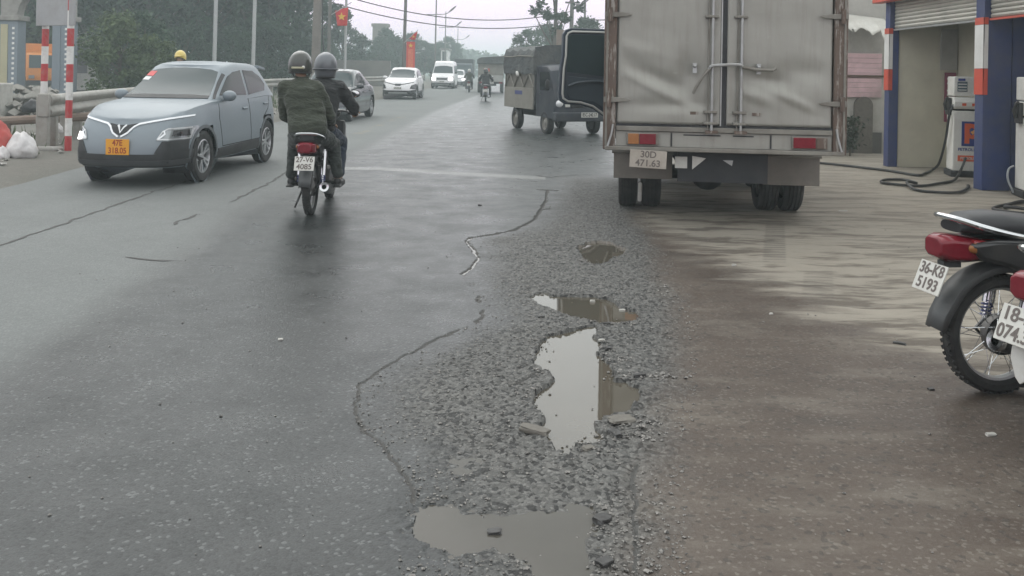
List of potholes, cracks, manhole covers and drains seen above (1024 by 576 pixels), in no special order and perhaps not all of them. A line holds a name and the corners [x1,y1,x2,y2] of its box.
pothole [402,501,600,576]
pothole [578,240,627,264]
crack [230,173,284,202]
pothole [532,324,641,455]
crack [459,175,569,275]
crack [0,171,217,245]
pothole [528,291,642,323]
